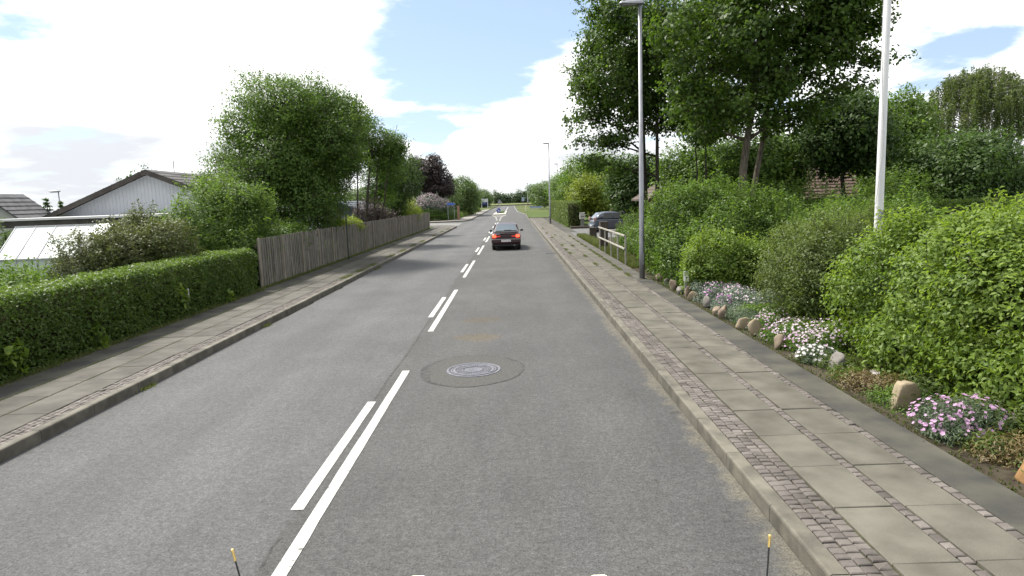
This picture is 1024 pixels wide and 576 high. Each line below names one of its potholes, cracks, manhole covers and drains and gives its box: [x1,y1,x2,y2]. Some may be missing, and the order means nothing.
manhole cover [446,363,501,377]
